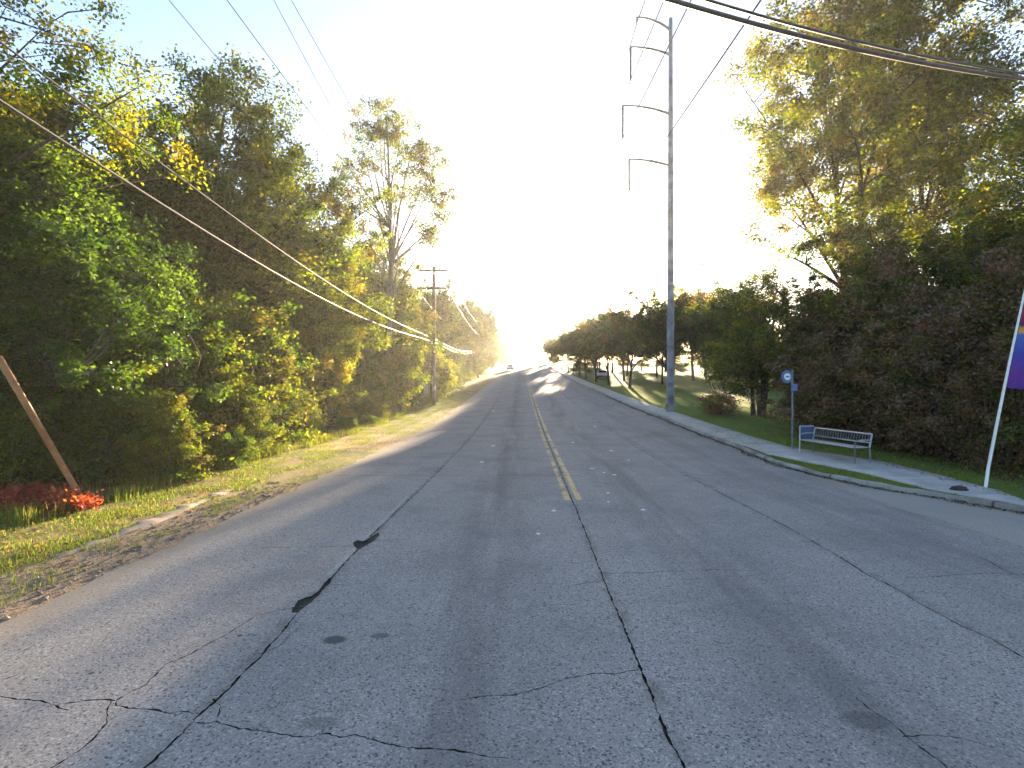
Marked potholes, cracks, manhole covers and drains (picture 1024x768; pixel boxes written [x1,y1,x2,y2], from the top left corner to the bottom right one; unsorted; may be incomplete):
crack [1,399,509,768]
crack [462,397,741,768]
pothole [353,533,379,550]
crack [572,402,1024,657]
crack [856,697,995,768]
pothole [291,578,332,613]
